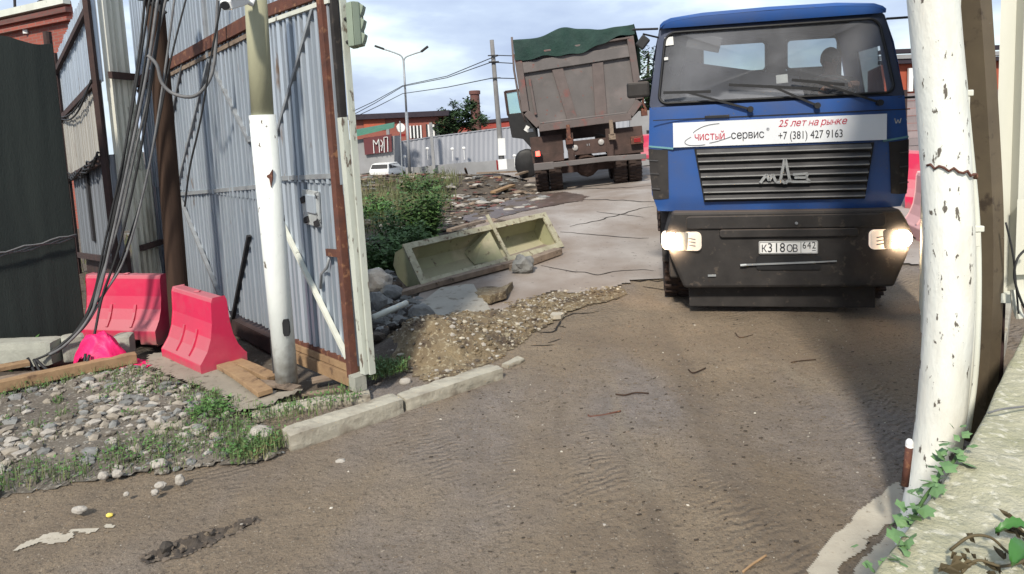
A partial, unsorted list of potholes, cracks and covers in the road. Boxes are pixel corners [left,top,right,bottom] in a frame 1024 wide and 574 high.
crack [555,185,654,238]
crack [541,265,664,290]
pothole [138,516,262,564]
